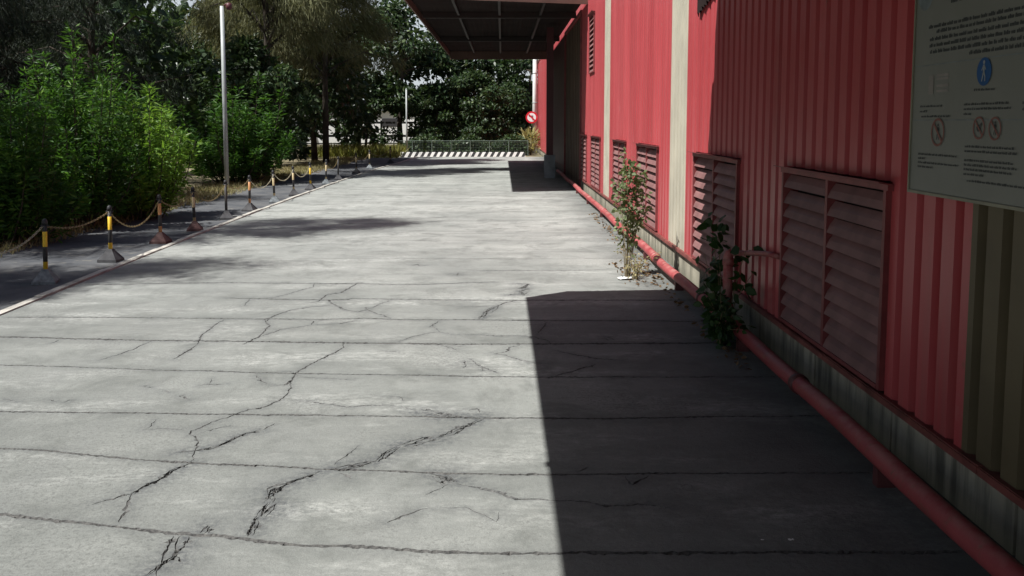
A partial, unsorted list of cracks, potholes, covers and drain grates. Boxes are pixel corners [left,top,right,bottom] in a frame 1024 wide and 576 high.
crack [245,282,391,344]
crack [174,321,221,359]
crack [94,344,481,576]
crack [387,474,675,523]
